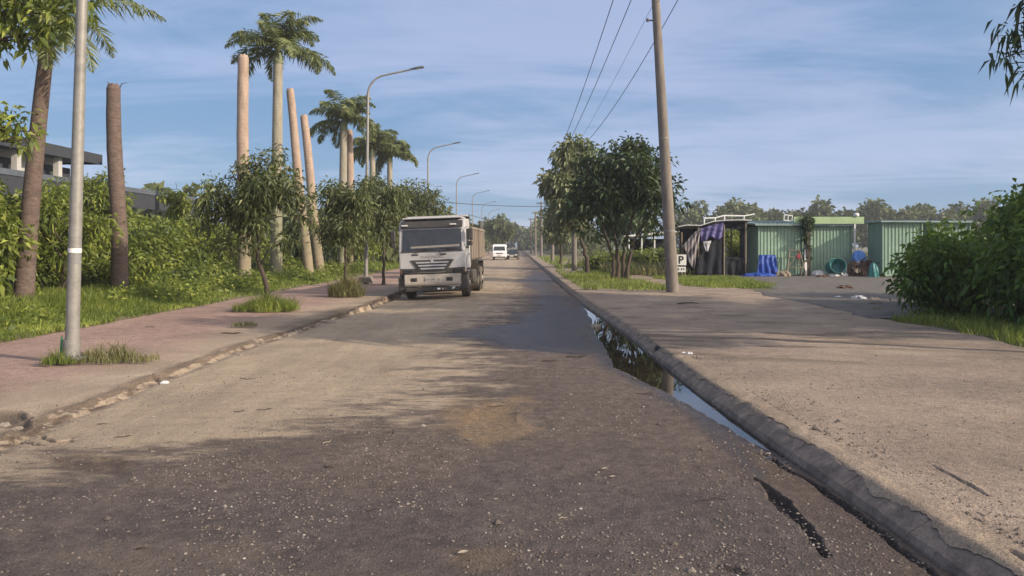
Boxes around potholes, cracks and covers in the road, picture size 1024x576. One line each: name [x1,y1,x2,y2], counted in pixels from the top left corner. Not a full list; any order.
crack [751,453,994,576]
